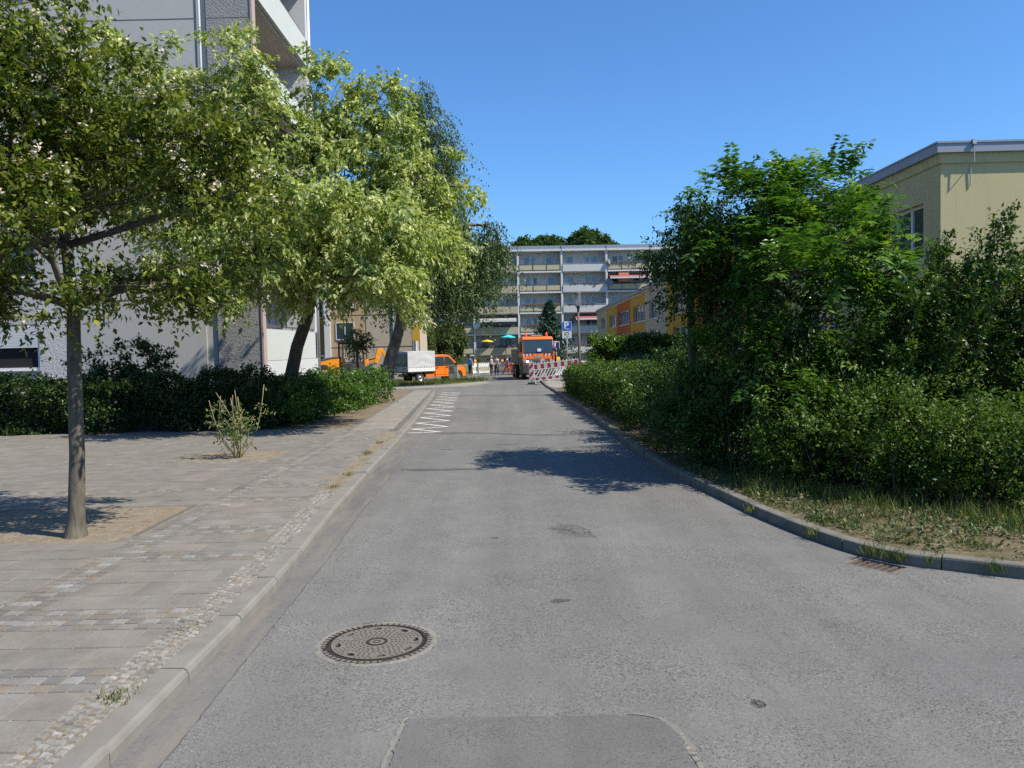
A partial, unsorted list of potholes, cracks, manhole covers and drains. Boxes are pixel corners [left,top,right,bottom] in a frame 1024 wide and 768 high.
drain grate [842,557,911,575]
manhole cover [315,622,438,666]
